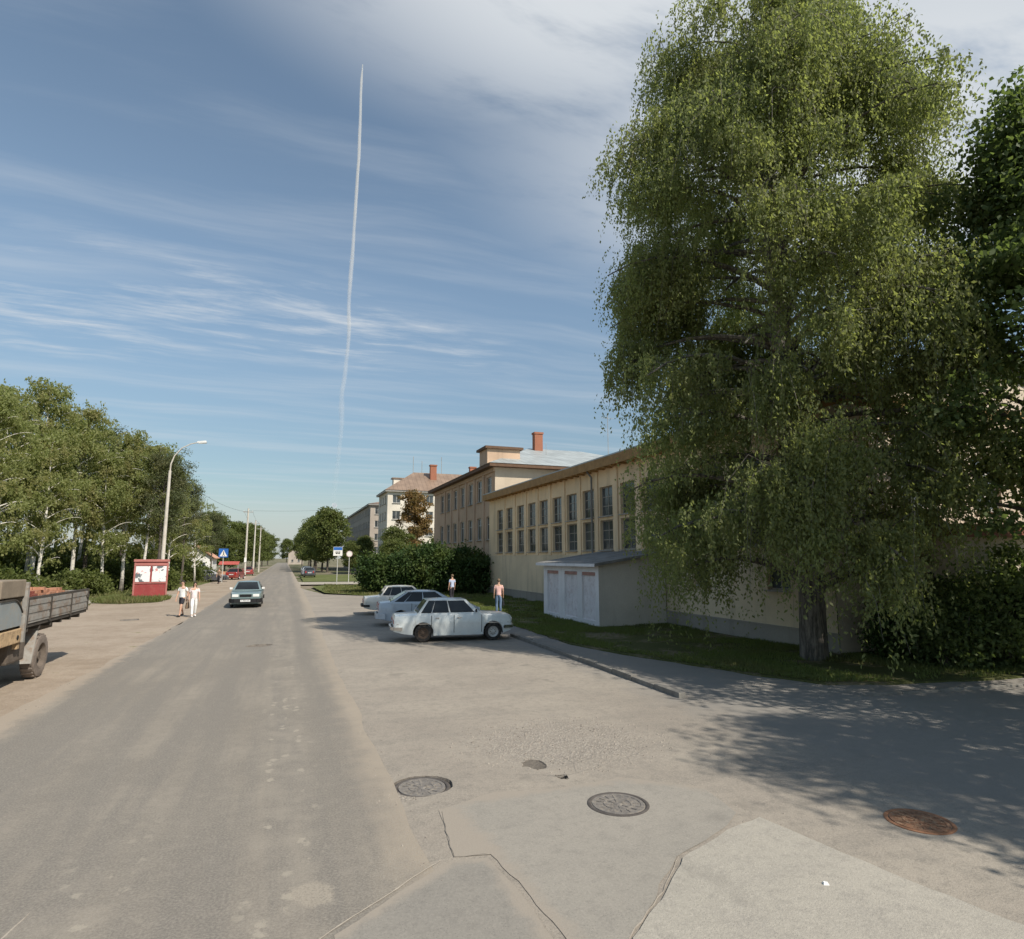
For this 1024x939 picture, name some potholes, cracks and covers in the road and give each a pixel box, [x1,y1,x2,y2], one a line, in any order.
manhole cover [395,777,450,797]
manhole cover [587,792,650,817]
manhole cover [883,808,957,835]
